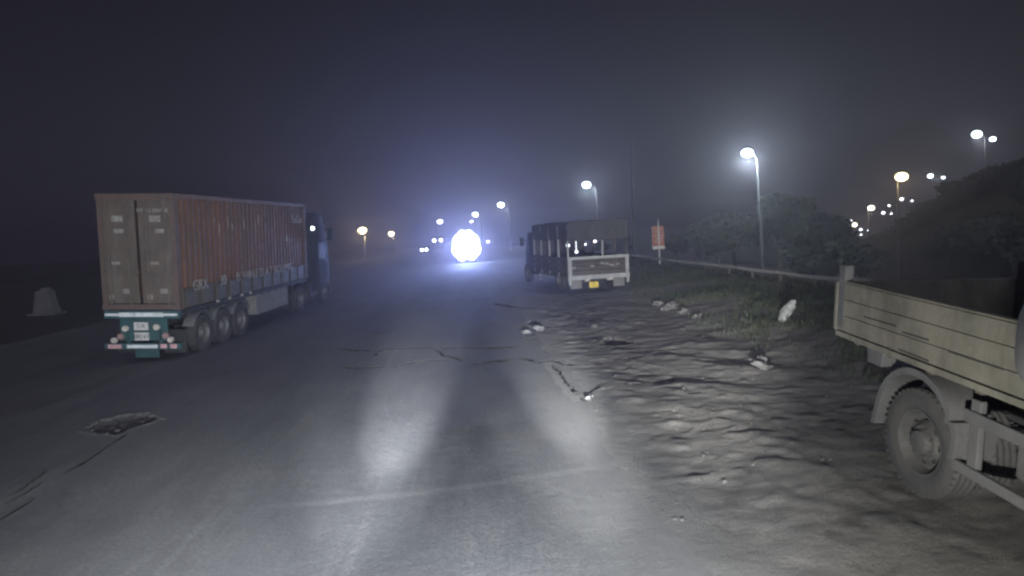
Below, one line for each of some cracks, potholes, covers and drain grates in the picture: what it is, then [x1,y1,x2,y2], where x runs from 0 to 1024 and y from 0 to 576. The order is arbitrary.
crack [0,432,135,524]
crack [331,303,718,402]
pothole [77,411,166,437]
